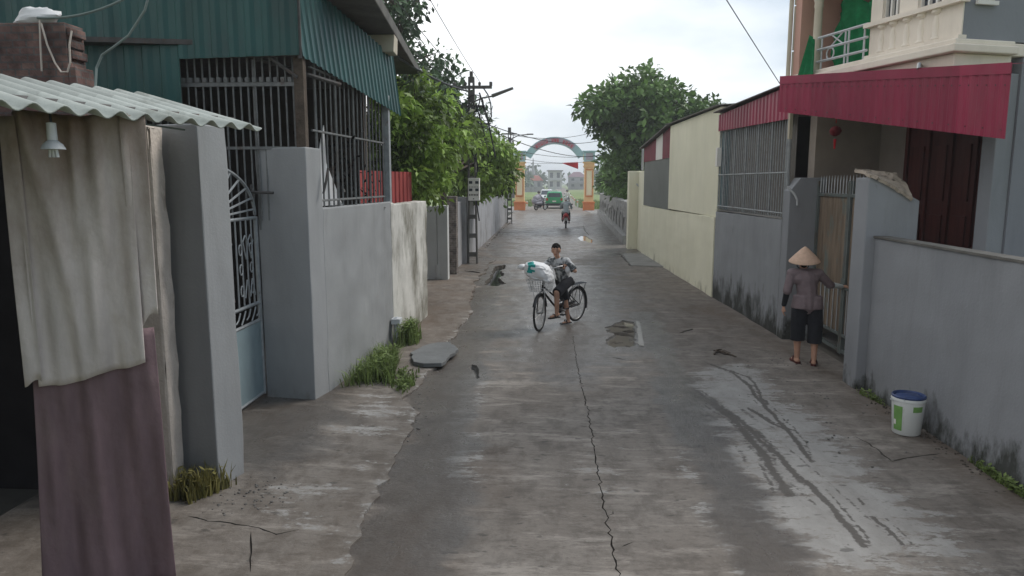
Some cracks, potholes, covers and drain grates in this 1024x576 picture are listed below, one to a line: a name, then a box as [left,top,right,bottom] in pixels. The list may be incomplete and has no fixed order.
crack [572,336,632,576]
crack [189,516,299,571]
pothole [605,320,644,348]
pothole [485,265,506,286]
crack [860,439,936,462]
